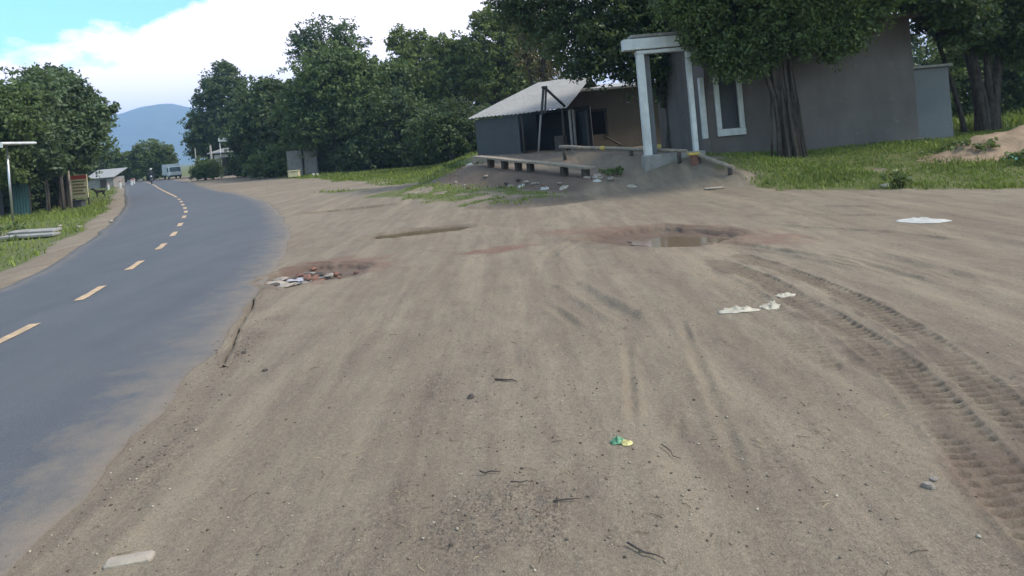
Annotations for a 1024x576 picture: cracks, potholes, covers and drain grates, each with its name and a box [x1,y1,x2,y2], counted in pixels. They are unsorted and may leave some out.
pothole [565,223,758,249]
pothole [246,260,382,291]
crack [218,288,265,368]
pothole [356,223,486,241]
